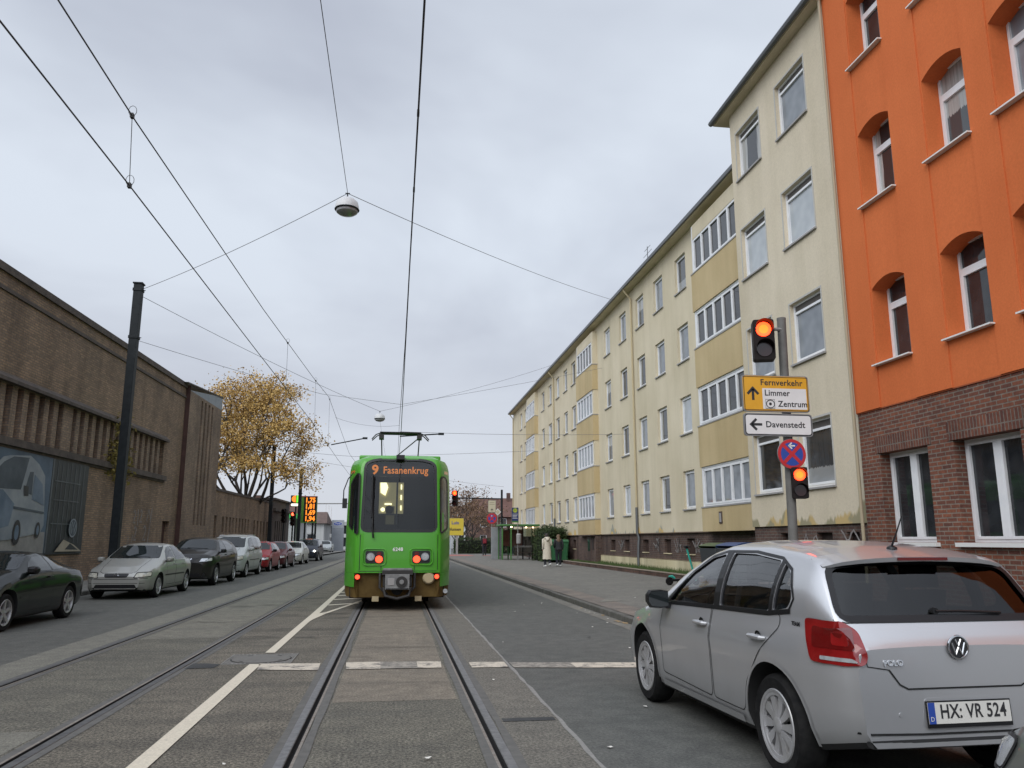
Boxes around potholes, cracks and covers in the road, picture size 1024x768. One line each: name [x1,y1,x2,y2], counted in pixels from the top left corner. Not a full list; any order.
manhole cover [220,653,299,665]
